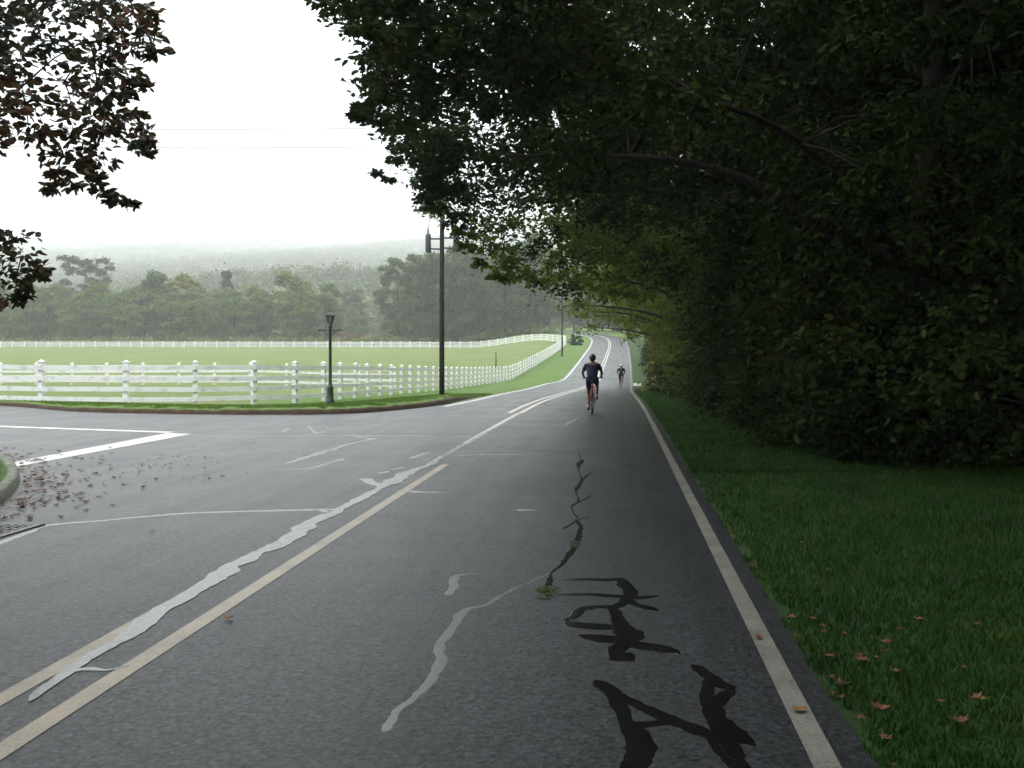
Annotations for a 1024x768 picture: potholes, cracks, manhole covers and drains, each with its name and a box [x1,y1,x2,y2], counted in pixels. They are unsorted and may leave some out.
drain grate [0,523,45,538]
